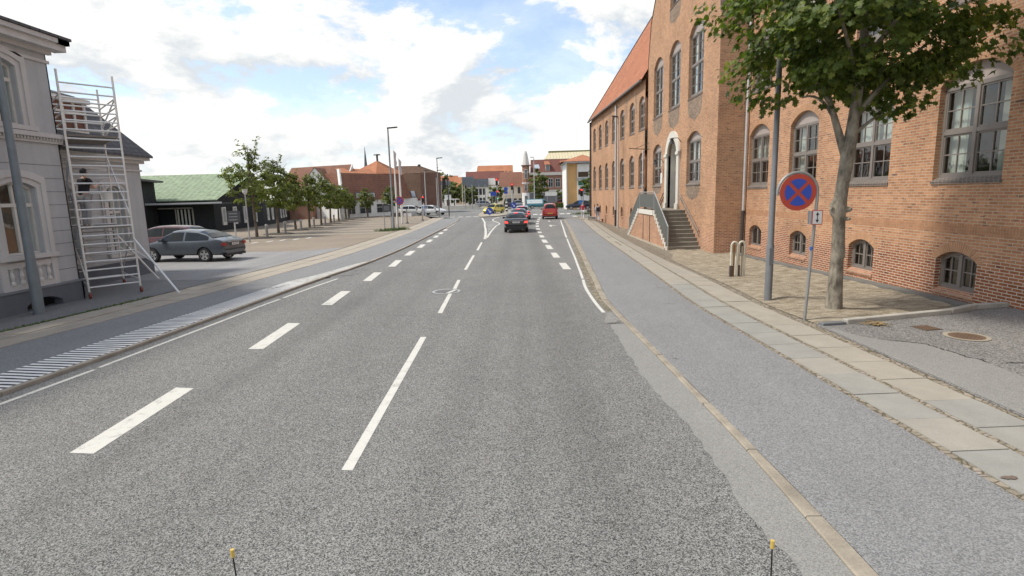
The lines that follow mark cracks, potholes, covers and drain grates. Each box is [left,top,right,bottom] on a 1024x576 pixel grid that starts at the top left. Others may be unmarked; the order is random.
manhole cover [943,331,992,341]
